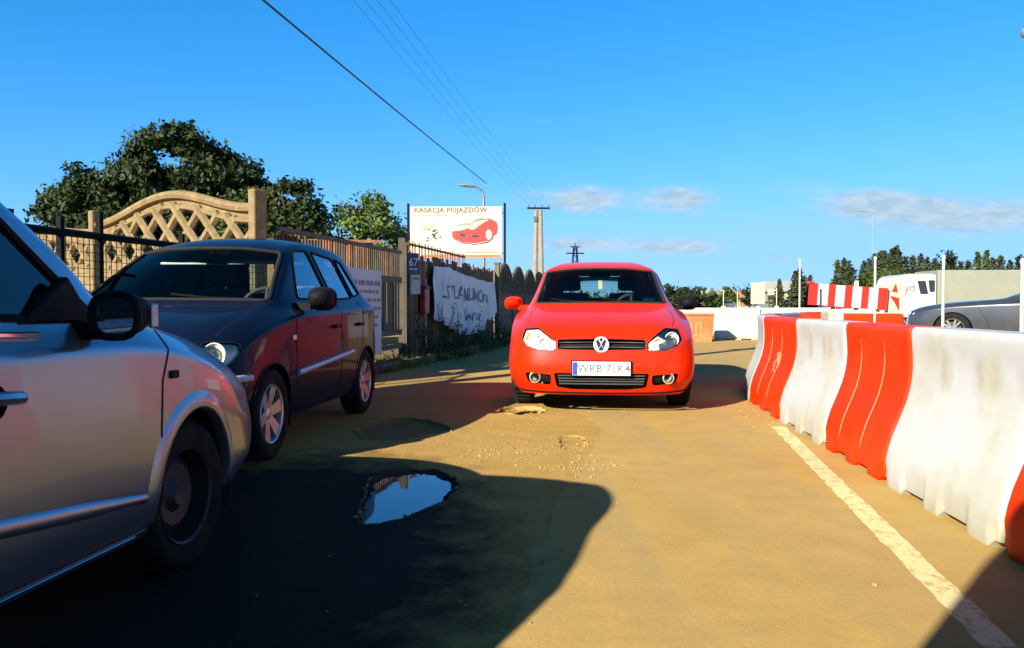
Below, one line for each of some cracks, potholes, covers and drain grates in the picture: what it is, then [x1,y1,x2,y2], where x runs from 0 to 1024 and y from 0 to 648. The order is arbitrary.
pothole [353,467,461,526]
pothole [498,406,547,416]
pothole [353,417,453,440]
pothole [557,435,589,451]
